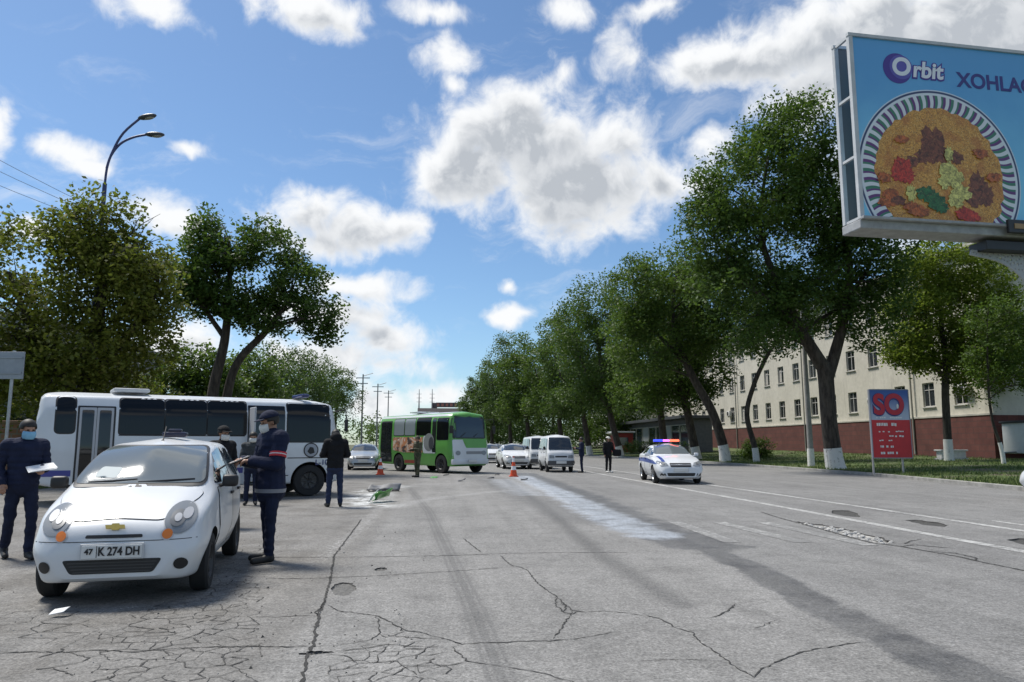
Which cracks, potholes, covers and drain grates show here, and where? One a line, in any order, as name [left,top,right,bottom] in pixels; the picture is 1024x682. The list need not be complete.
pothole [795,521,893,544]
crack [762,512,1024,571]
crack [0,519,857,682]
